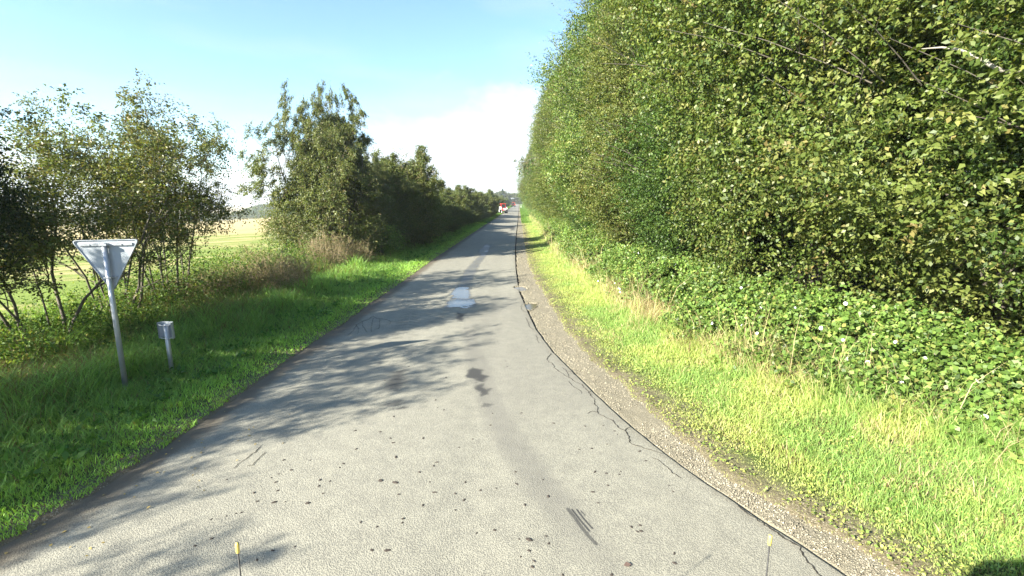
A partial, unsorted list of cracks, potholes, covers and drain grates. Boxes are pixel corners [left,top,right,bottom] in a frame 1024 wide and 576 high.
crack [739,507,821,576]
crack [515,223,681,478]
